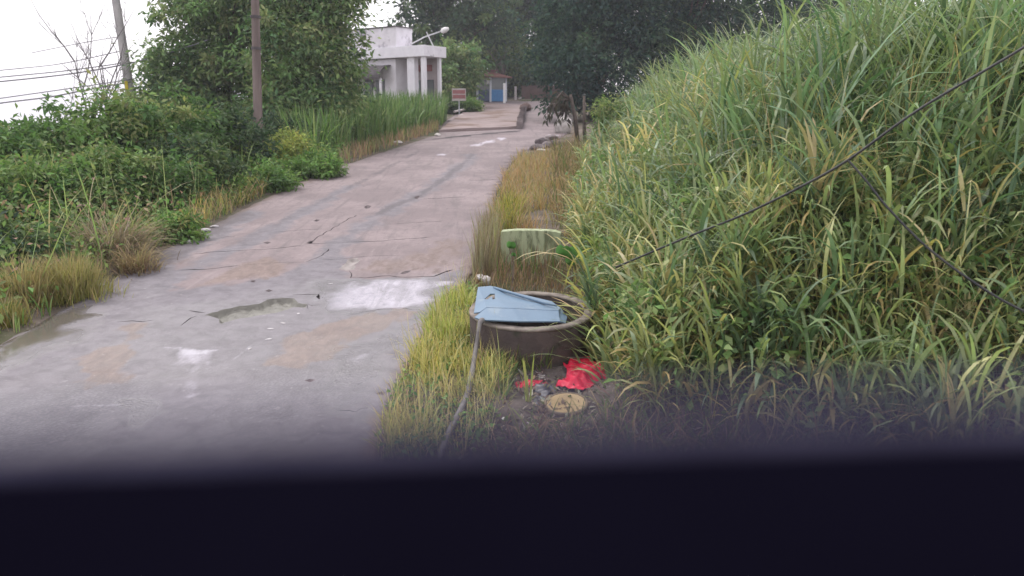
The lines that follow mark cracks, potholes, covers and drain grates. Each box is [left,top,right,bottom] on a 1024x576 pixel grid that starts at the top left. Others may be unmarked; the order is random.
pothole [207,298,307,324]
